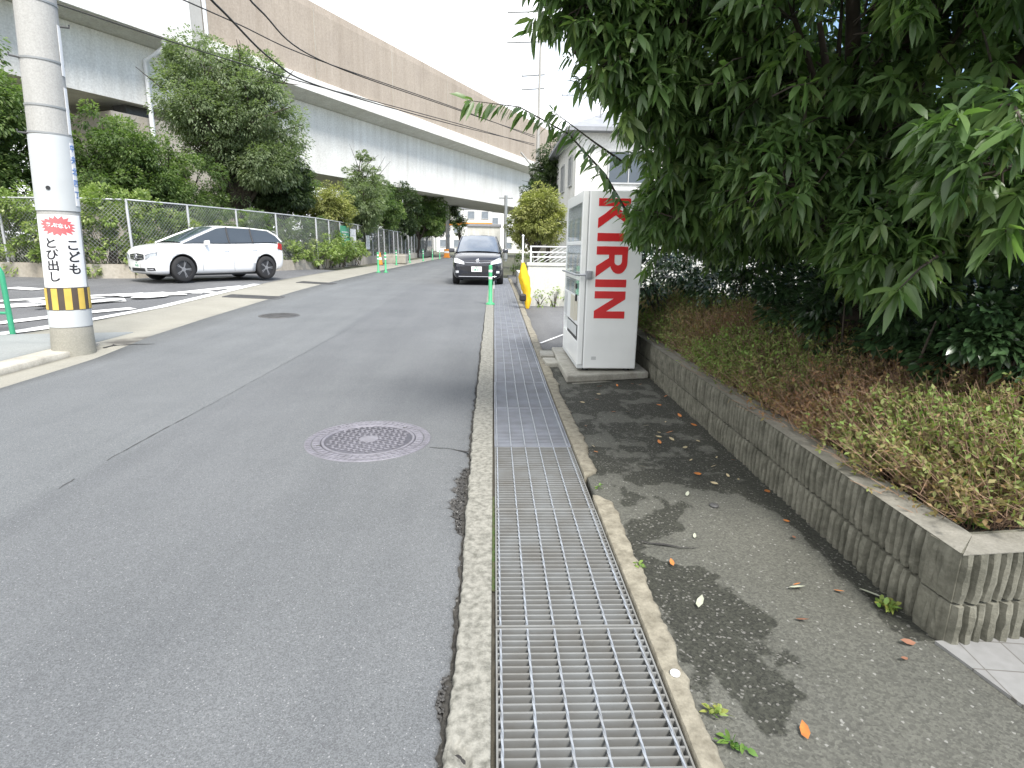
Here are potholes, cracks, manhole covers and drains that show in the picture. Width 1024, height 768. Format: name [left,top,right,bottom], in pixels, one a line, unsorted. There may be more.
drain grate [494,408,571,448]
manhole cover [304,421,431,462]
drain grate [494,348,539,363]
drain grate [494,382,556,408]
drain grate [494,319,526,327]
drain grate [496,627,696,768]
drain grate [494,336,533,348]
crack [432,338,483,768]
drain grate [494,363,546,382]
drain grate [495,447,595,509]
drain grate [494,327,529,337]
